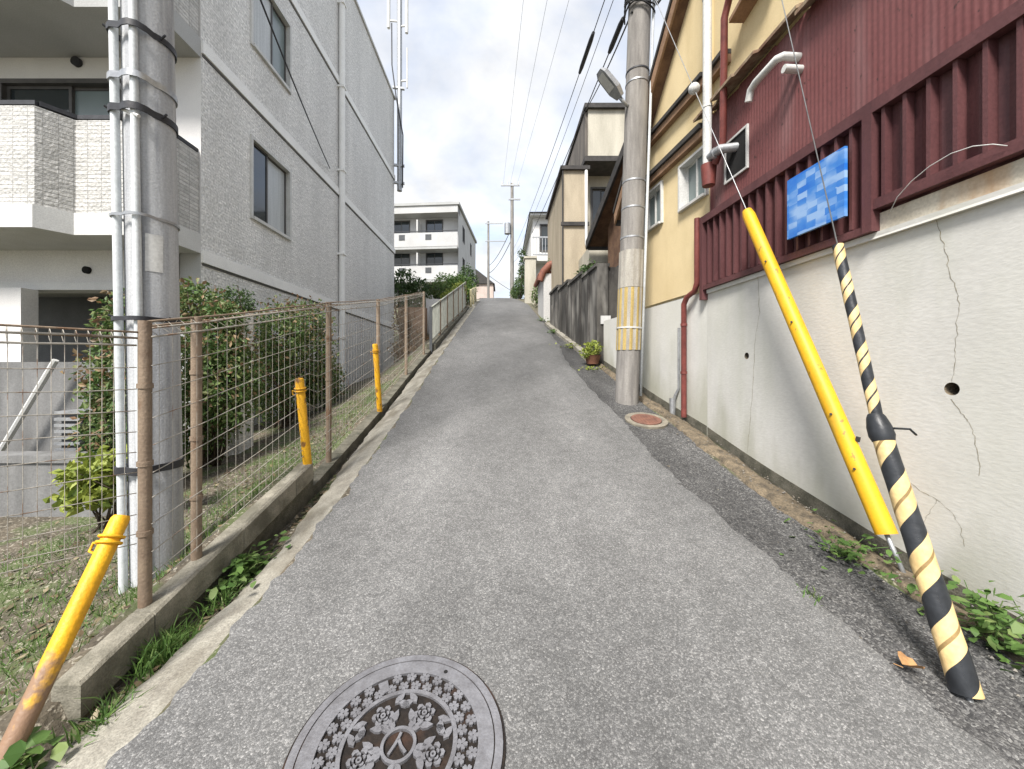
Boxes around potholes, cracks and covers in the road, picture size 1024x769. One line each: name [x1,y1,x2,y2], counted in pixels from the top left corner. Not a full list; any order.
manhole cover [625,412,668,429]
manhole cover [282,655,506,769]
